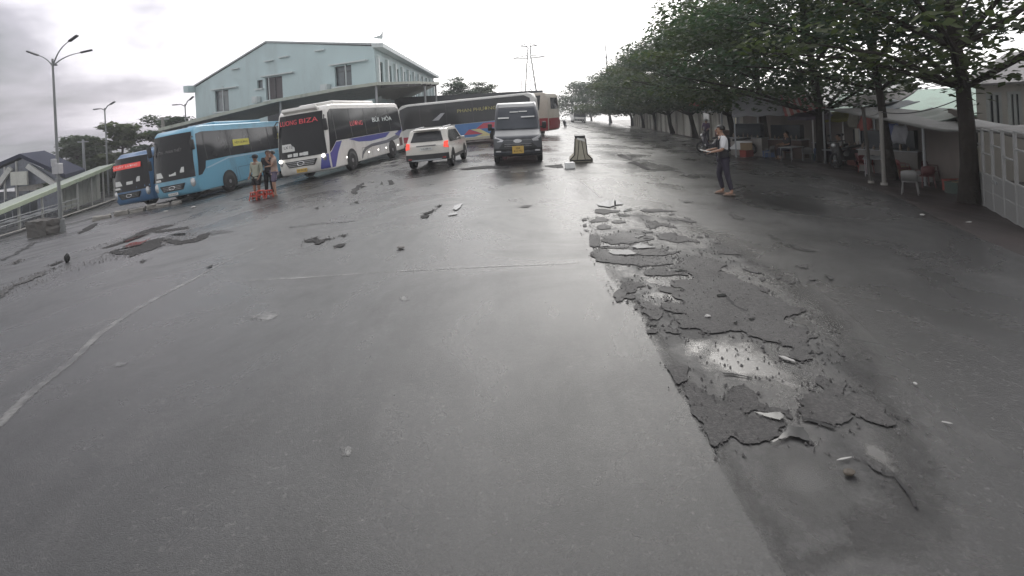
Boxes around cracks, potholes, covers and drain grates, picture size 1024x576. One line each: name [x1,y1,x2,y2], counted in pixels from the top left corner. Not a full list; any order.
crack [802,417,835,429]
pothole [667,364,689,384]
pothole [660,256,814,361]
pothole [165,233,210,244]
pothole [683,382,793,446]
pothole [104,225,171,248]
pothole [589,234,600,247]
pothole [613,281,645,302]
pothole [601,232,650,244]
pothole [631,248,681,256]
crack [882,472,917,507]
